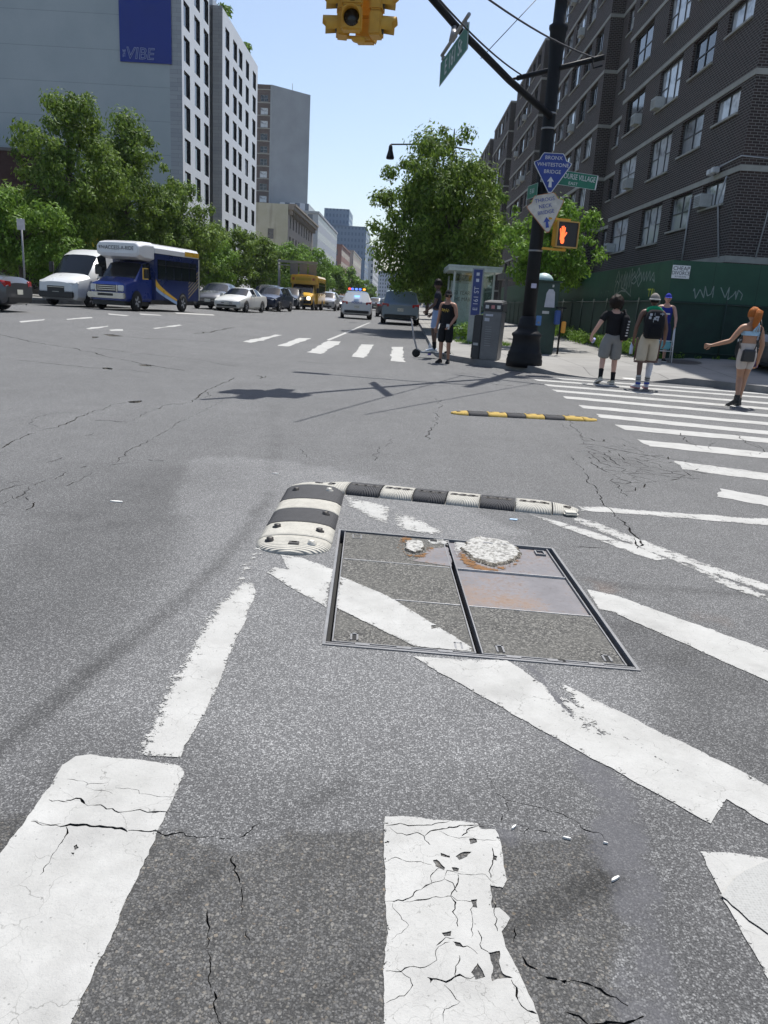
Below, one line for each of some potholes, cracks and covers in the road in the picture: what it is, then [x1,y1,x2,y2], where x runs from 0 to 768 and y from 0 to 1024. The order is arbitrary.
crack [392,824,644,1024]
crack [0,377,234,515]
crack [565,413,768,548]
crack [36,799,258,942]
crack [206,911,221,1024]
manhole cover [322,529,641,672]
crack [479,764,607,842]
